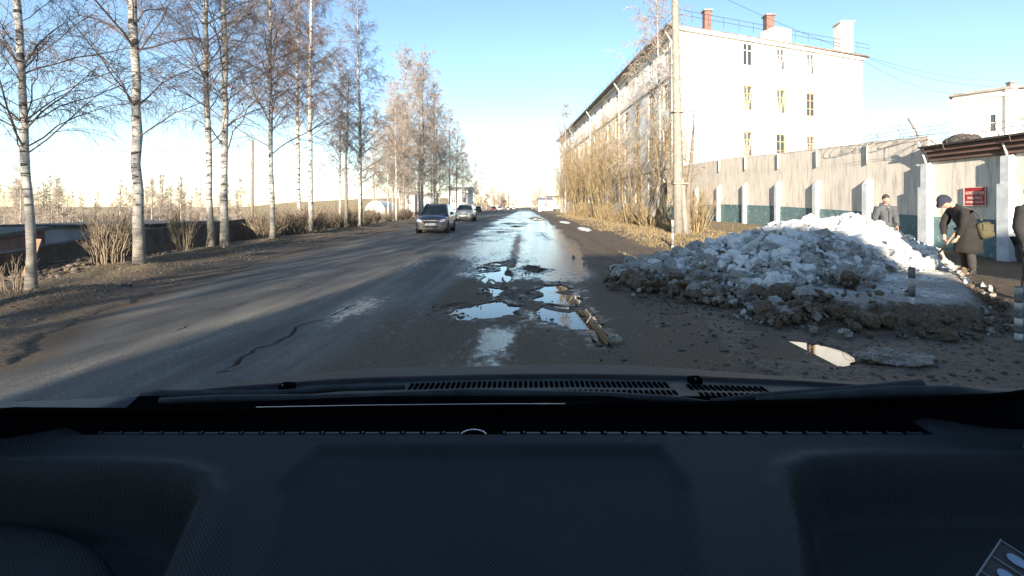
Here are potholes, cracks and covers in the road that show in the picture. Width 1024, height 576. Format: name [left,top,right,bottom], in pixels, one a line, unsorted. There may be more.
pothole [513,283,591,313]
pothole [531,303,618,351]
pothole [437,297,531,323]
crack [165,282,364,373]
pothole [507,265,557,274]
pothole [464,260,527,288]
